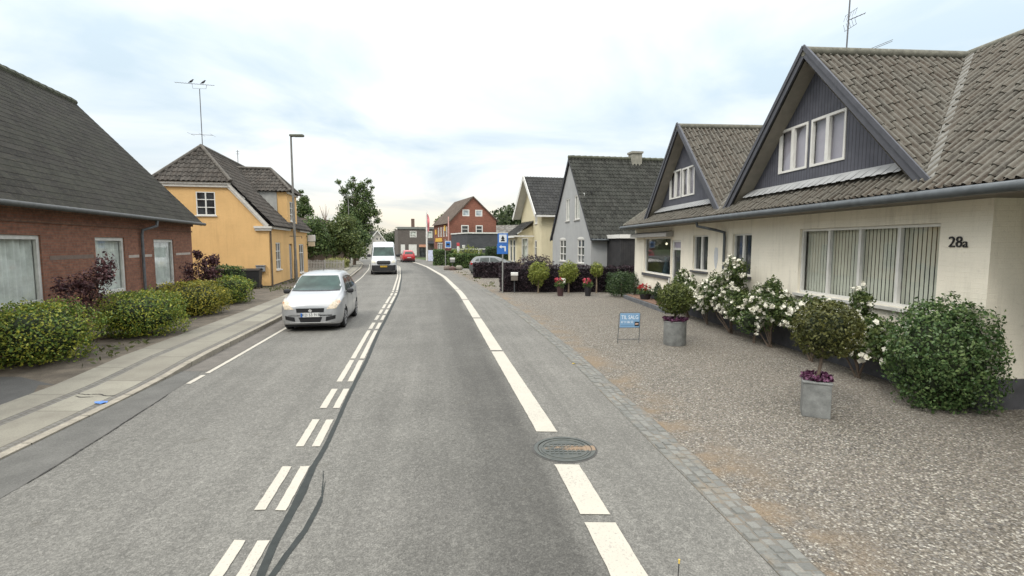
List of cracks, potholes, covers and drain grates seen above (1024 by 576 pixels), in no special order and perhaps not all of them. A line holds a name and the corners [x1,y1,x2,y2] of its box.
manhole cover [532,437,597,463]
